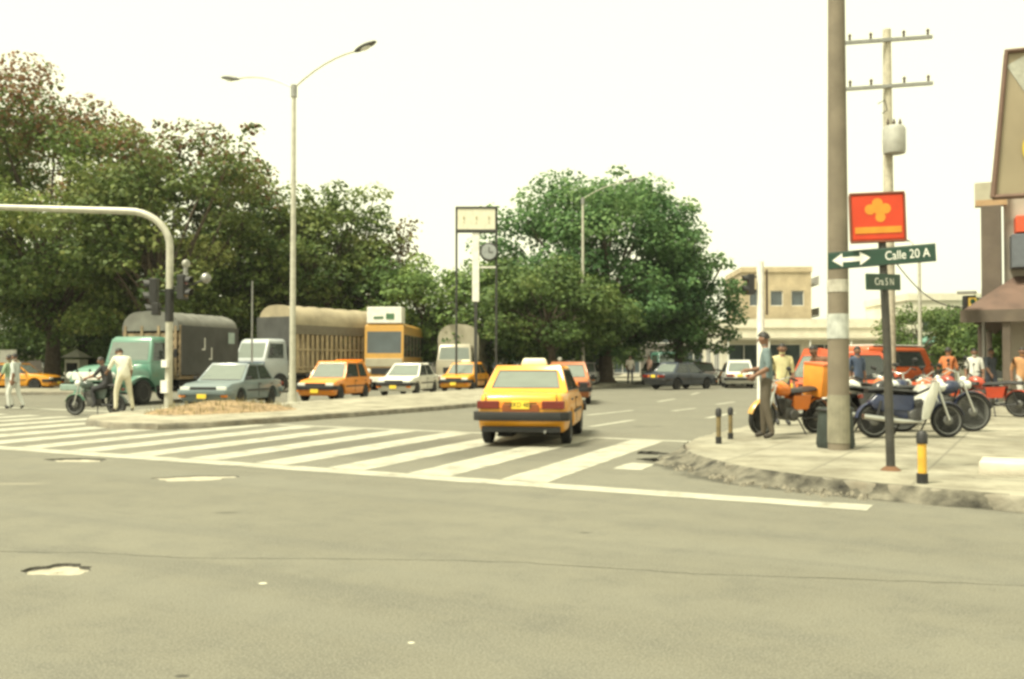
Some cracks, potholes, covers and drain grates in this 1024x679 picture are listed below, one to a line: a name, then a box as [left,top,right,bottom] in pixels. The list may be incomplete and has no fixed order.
pothole [21,563,92,575]
